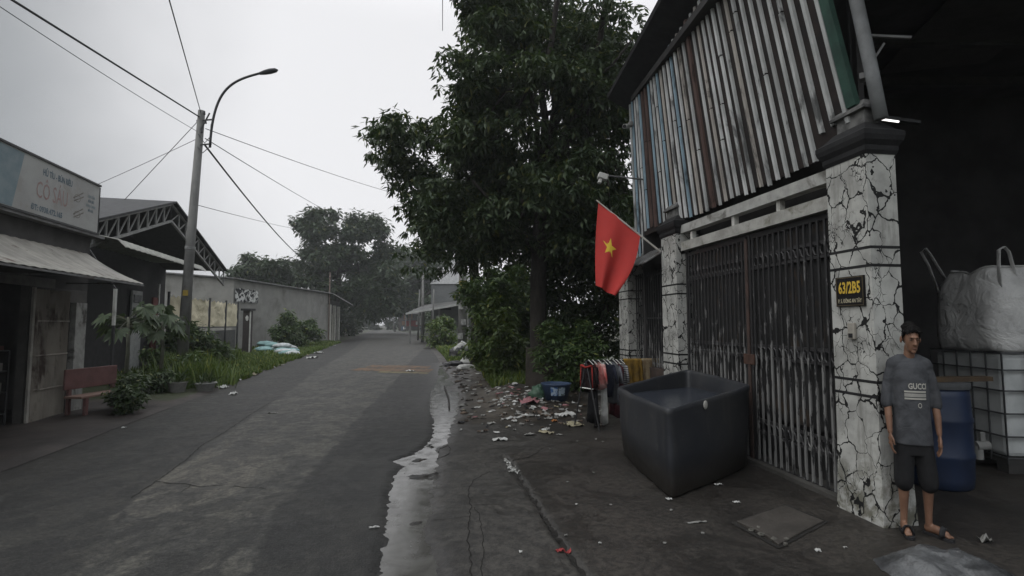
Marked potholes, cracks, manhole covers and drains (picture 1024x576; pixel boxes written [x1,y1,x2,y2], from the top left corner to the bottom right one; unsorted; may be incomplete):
crack [131,400,274,498]
crack [436,471,501,576]
